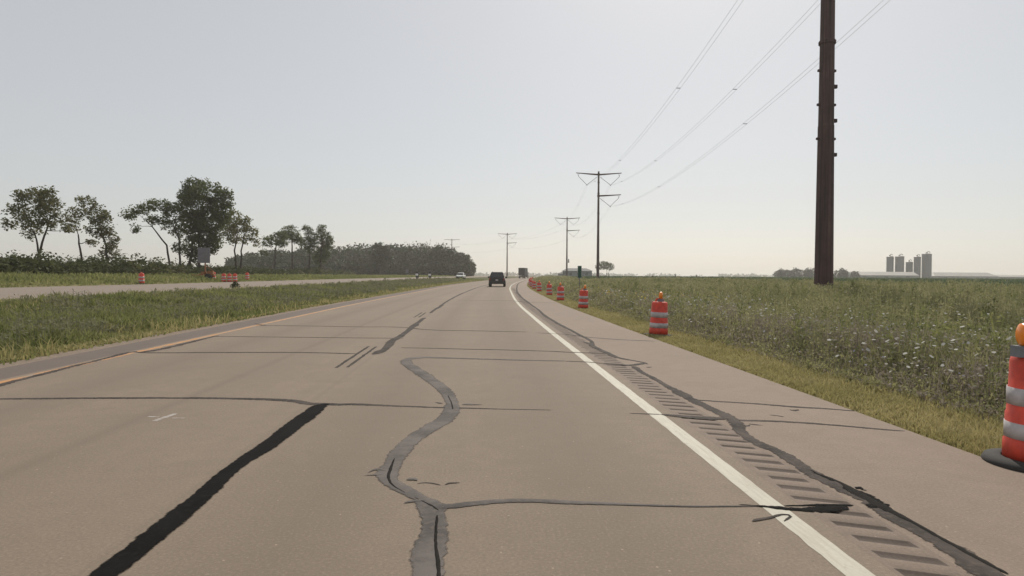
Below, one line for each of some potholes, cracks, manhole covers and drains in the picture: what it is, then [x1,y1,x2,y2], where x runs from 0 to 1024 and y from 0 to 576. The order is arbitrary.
crack [138,324,517,354]
crack [700,400,902,431]
